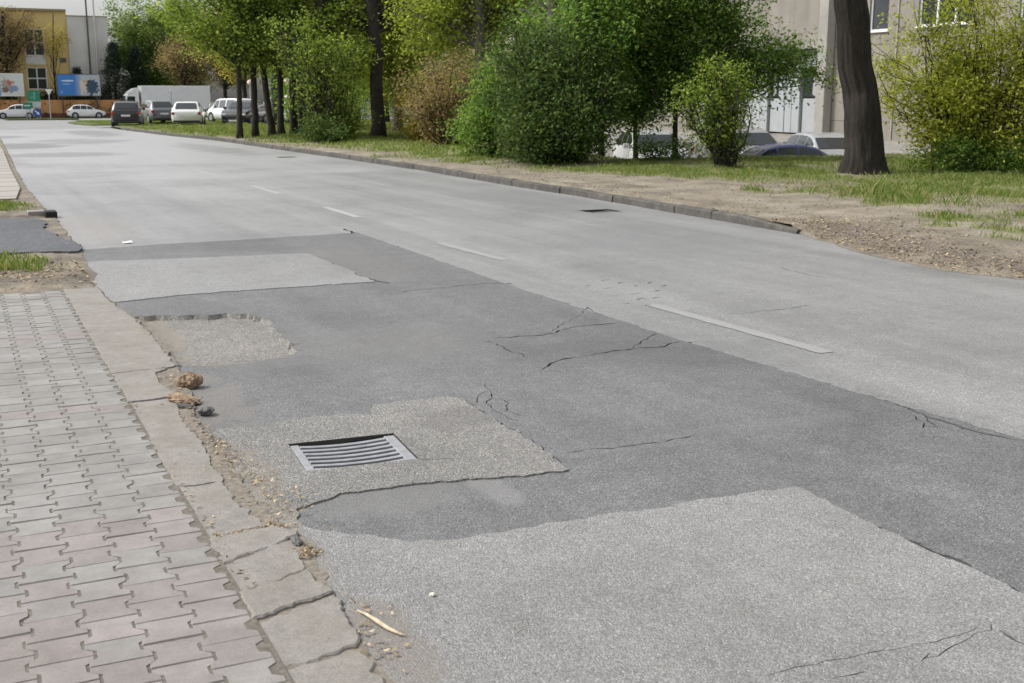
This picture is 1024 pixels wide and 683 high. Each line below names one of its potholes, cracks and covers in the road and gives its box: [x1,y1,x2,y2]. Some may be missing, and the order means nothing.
crack [488,307,617,357]
drain grate [289,433,419,471]
pothole [135,313,301,368]
crack [542,333,692,373]
crack [885,400,1010,439]
crack [786,627,1022,678]
crack [466,384,688,462]
